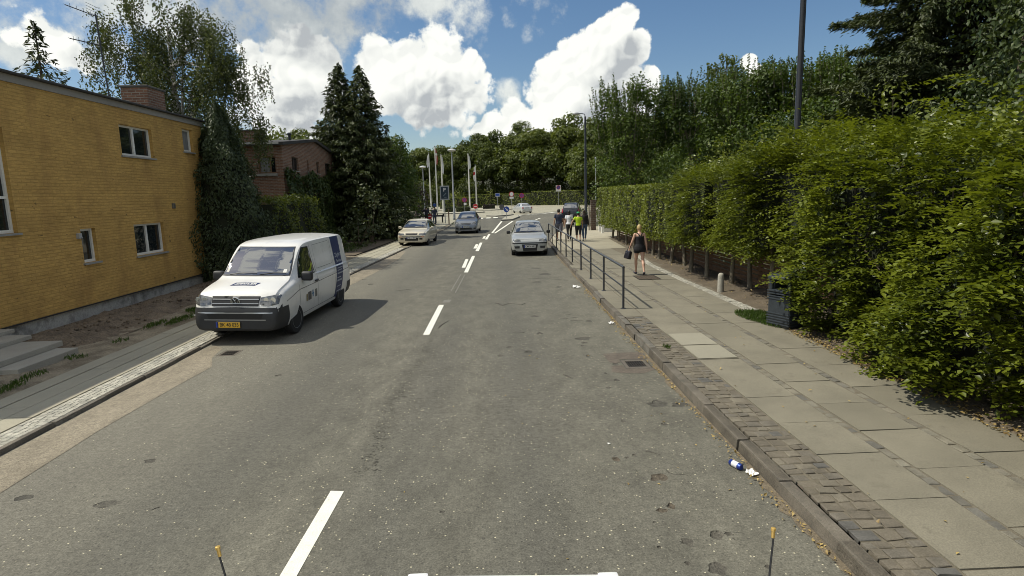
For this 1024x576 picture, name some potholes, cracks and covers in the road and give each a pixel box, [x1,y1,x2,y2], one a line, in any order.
pothole [710,530,724,540]
drain grate [620,359,653,369]
pothole [93,500,122,509]
pothole [651,473,668,481]
pothole [647,399,668,407]
